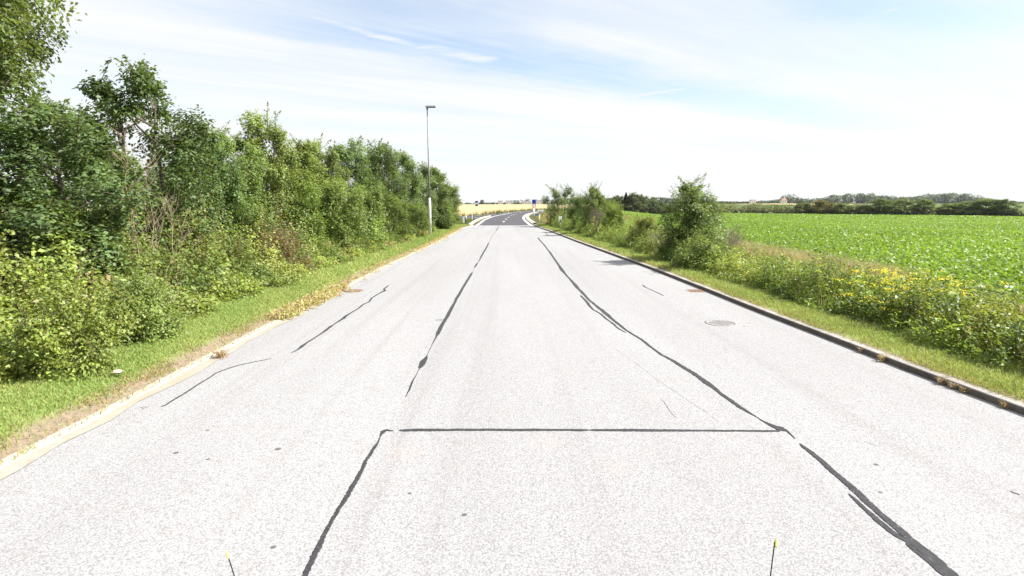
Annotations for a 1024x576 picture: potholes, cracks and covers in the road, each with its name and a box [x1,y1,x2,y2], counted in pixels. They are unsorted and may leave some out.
crack [580,295,717,421]
